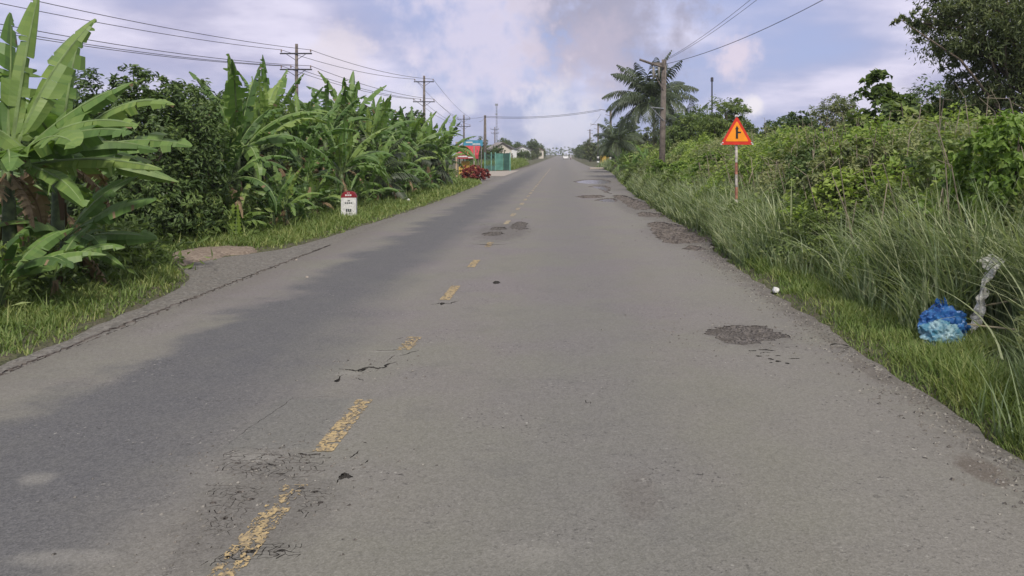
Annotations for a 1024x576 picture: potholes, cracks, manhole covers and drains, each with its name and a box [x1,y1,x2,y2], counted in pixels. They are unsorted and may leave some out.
crack [202,543,301,566]
pothole [511,222,529,230]
crack [205,338,415,537]
pothole [647,222,712,244]
